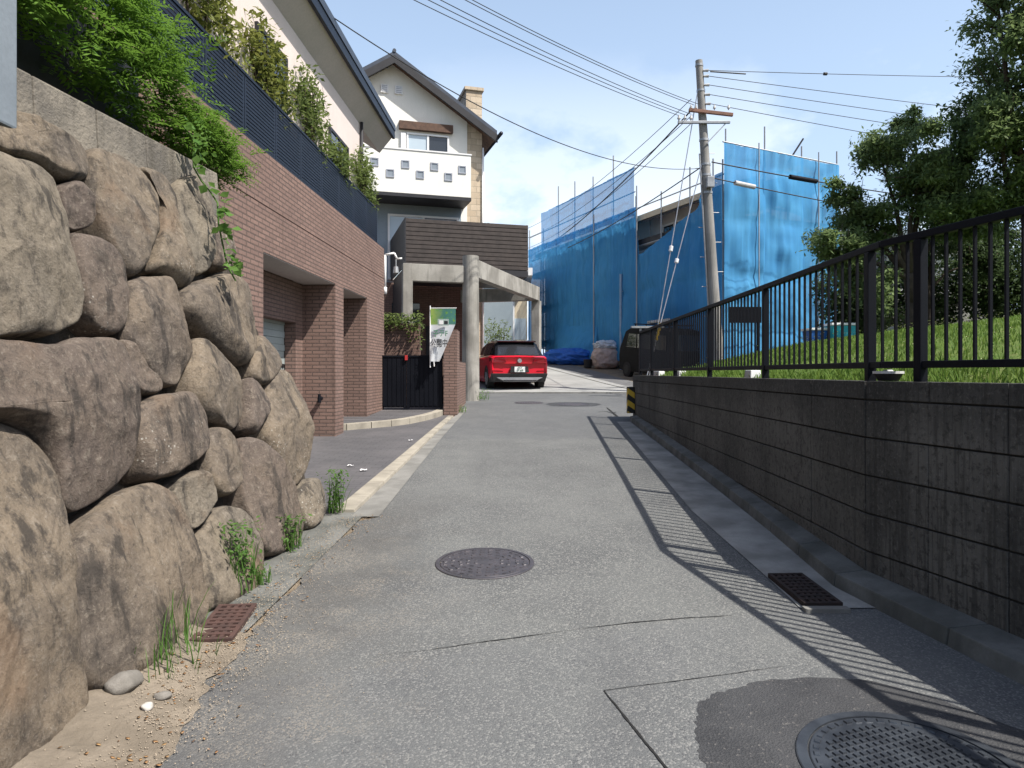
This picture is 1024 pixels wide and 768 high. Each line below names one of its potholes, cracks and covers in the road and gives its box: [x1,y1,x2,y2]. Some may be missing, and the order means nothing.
drain grate [768,573,843,606]
manhole cover [795,711,1021,768]
drain grate [189,603,257,643]
manhole cover [435,547,534,580]
